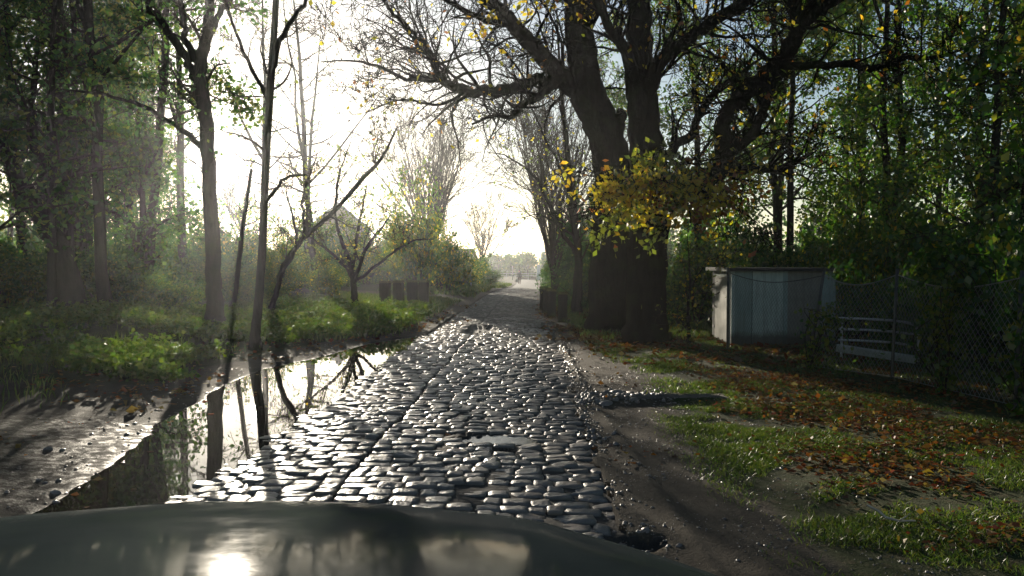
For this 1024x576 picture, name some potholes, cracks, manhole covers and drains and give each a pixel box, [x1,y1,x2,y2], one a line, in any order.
pothole [603,535,670,552]
pothole [455,431,547,447]
